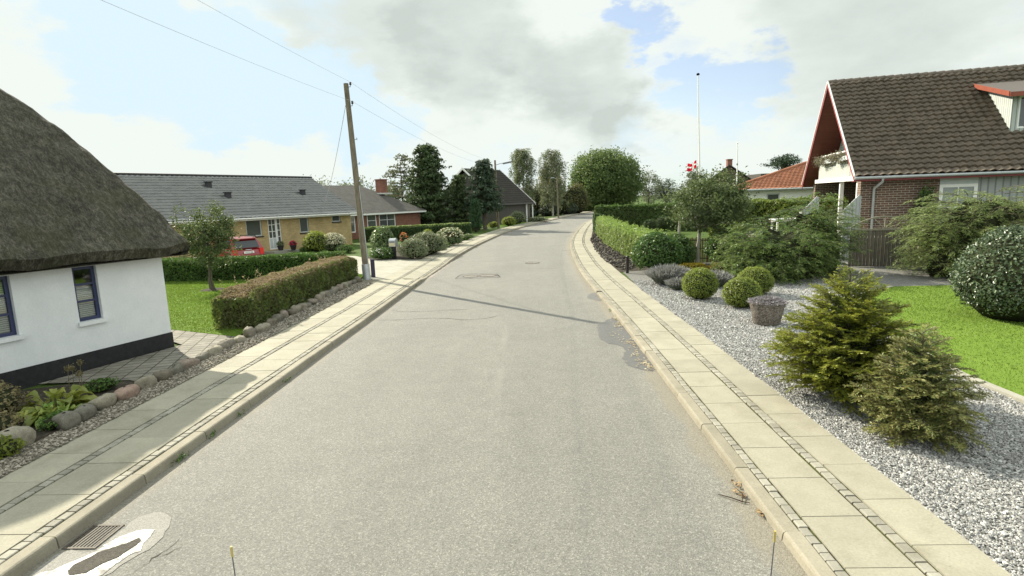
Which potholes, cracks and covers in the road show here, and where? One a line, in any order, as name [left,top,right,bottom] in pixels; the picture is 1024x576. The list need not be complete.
drain grate [62,524,125,550]
